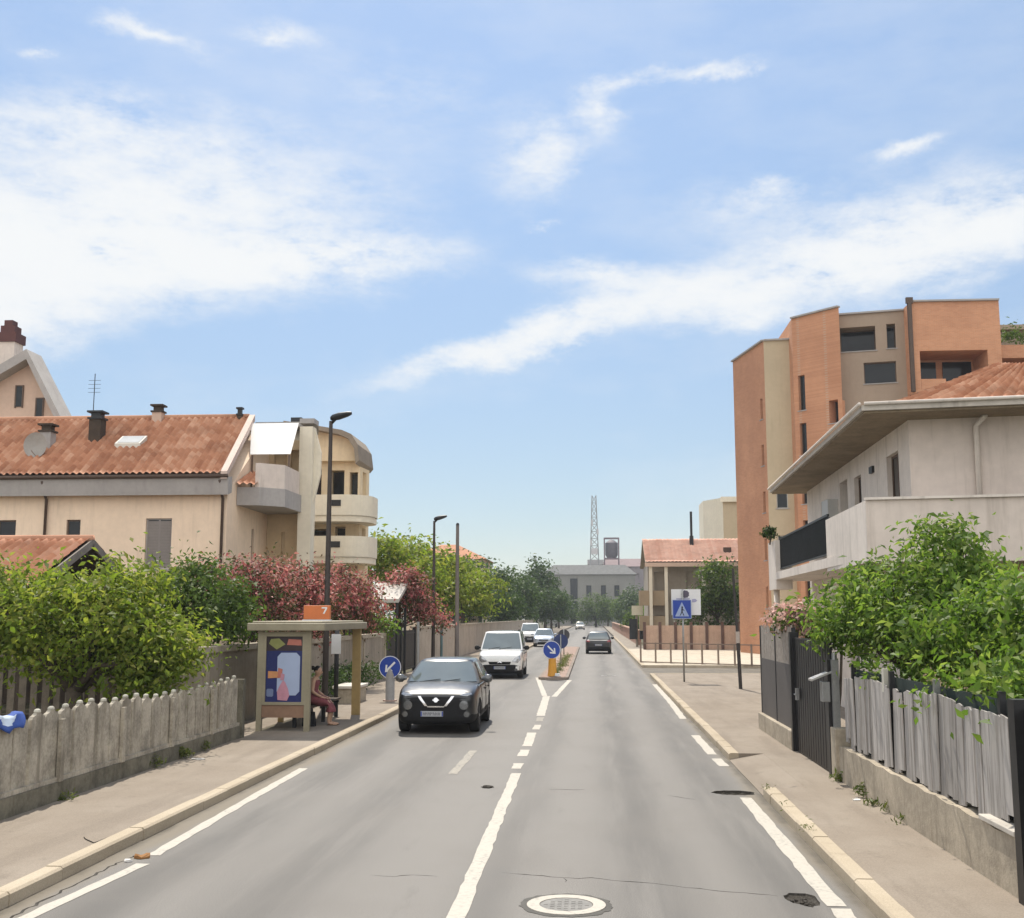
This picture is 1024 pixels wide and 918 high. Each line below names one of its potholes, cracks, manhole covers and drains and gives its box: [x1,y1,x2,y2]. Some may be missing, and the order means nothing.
pothole [784,893,820,907]
crack [512,873,774,896]
crack [10,856,134,918]
manhole cover [519,893,613,918]
